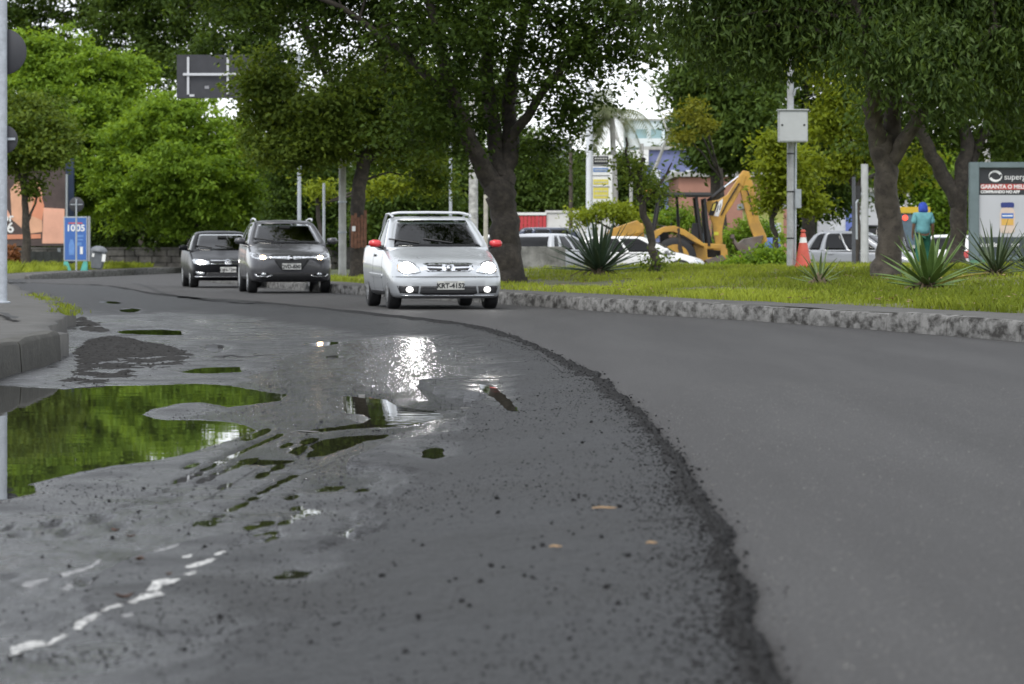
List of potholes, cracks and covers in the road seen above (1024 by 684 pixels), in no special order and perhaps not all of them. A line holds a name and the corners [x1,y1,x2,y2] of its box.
pothole [297,394,470,433]
pothole [59,336,195,388]
pothole [0,383,287,489]
